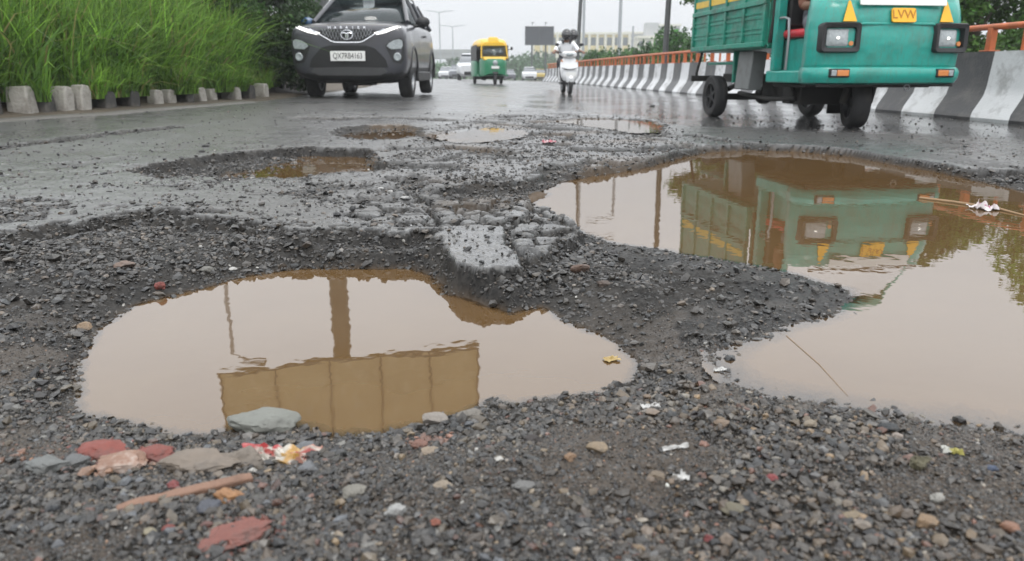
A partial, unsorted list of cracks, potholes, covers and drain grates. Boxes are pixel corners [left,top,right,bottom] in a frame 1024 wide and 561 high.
pothole [324,124,431,140]
pothole [4,236,679,453]
pothole [546,117,676,135]
pothole [123,145,403,180]
pothole [501,142,1024,455]
